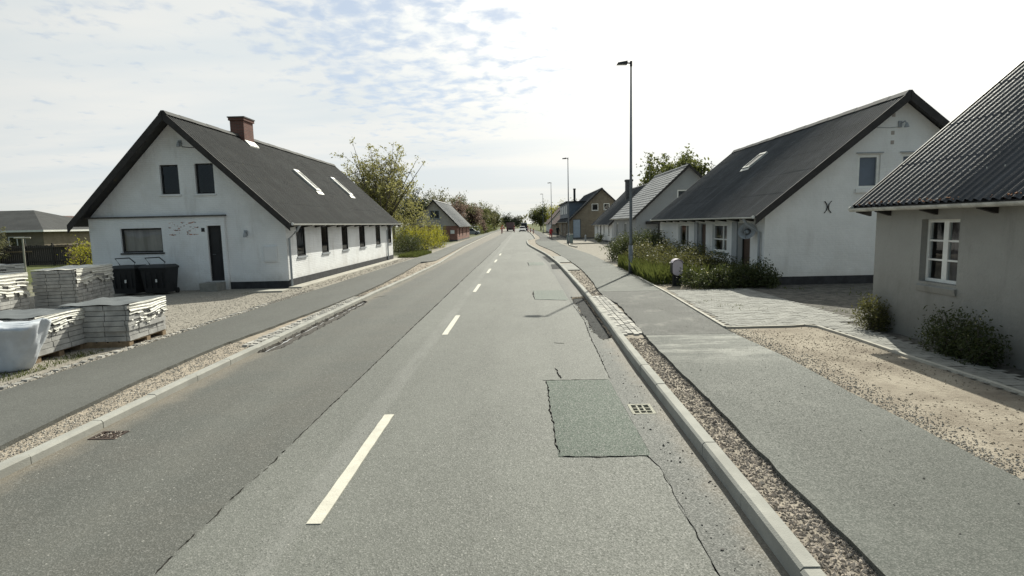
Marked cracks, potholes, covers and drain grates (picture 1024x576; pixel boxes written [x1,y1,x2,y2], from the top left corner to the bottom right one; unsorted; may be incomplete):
crack [546,308,720,576]
drain grate [627,404,657,414]
drain grate [87,430,130,440]
